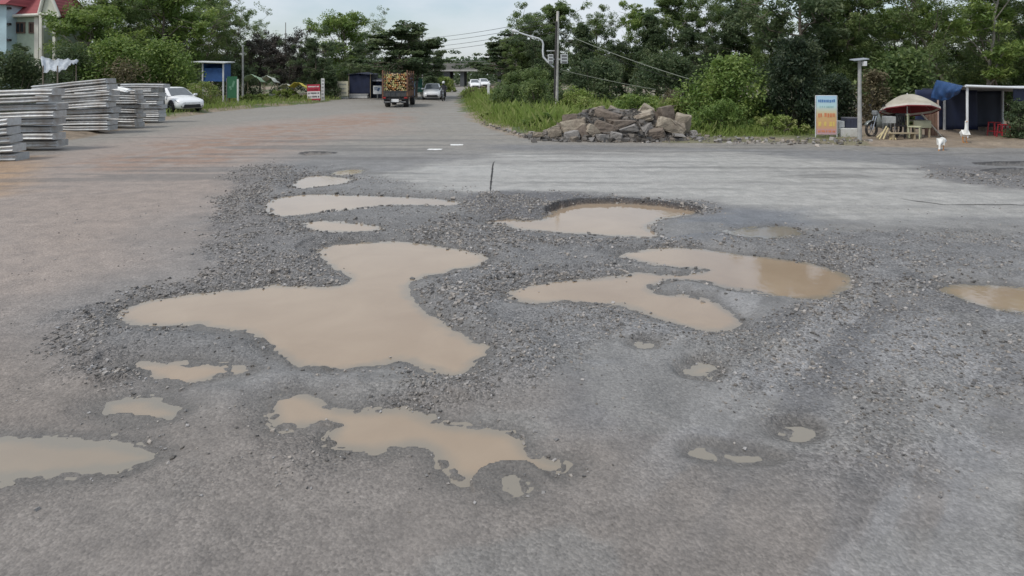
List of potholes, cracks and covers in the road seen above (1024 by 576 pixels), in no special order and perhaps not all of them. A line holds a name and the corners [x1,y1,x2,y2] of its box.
pothole [291,215,394,233]
pothole [922,274,1024,316]
pothole [253,190,472,217]
pothole [490,240,875,335]
pothole [284,173,360,189]
pothole [713,221,813,240]
pothole [237,376,601,500]
pothole [673,433,795,469]
pothole [469,197,712,240]
pothole [0,416,191,499]
pothole [97,233,513,383]
